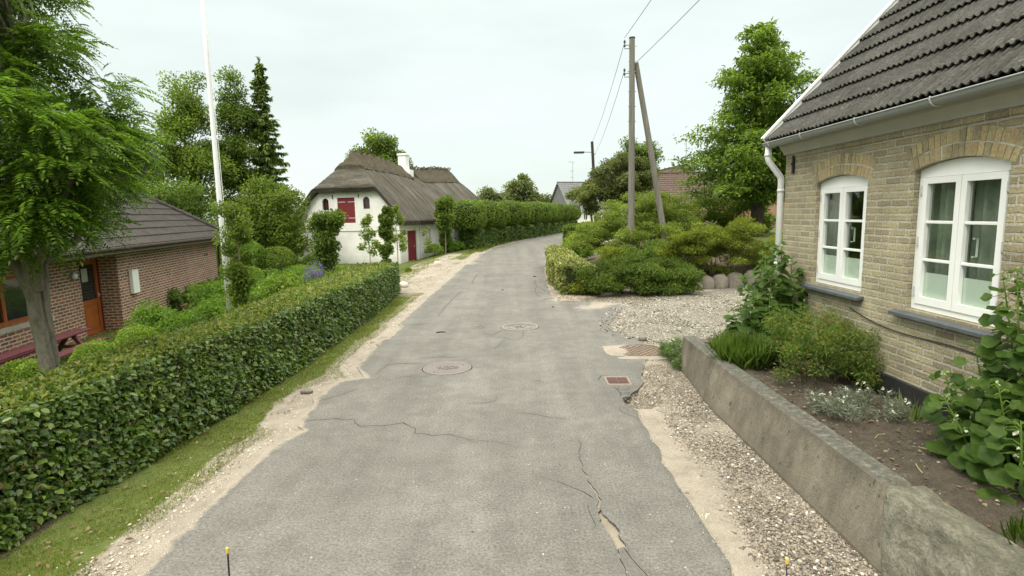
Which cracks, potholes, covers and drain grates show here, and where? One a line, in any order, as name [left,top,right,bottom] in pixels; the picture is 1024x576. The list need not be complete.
crack [562,444,644,576]
manhole cover [423,361,472,375]
manhole cover [501,323,538,331]
drain grate [603,376,633,385]
